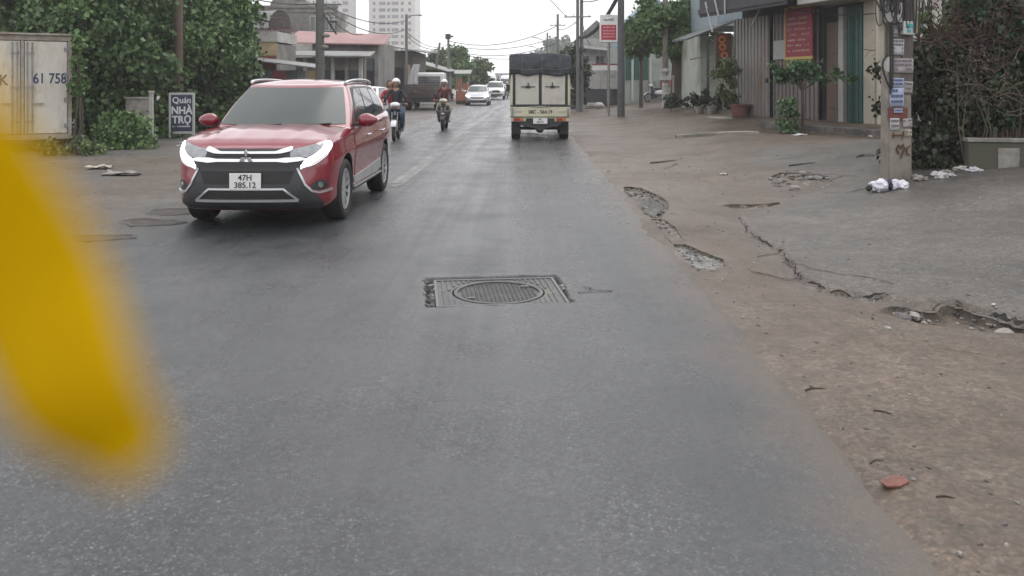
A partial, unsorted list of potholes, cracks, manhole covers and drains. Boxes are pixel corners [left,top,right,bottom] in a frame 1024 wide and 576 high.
crack [736,217,1024,329]
pothole [672,244,729,272]
pothole [864,300,1024,356]
manhole cover [422,277,569,307]
pothole [623,187,672,219]
pothole [764,171,836,192]
pothole [719,202,783,211]
pothole [650,219,683,244]
